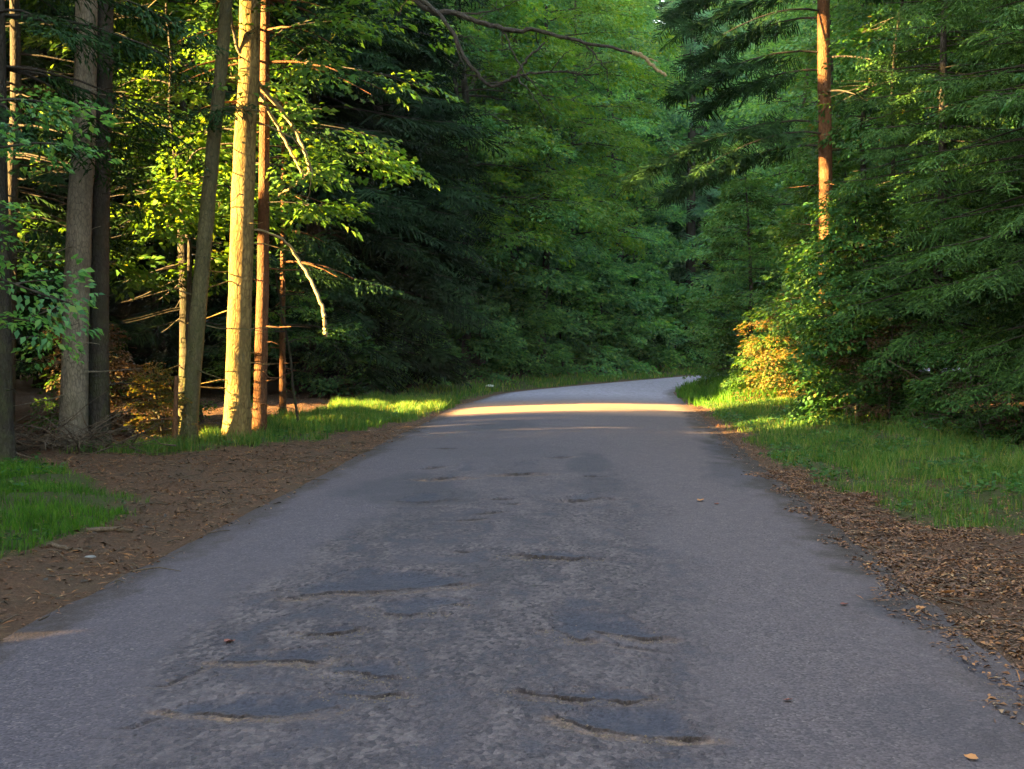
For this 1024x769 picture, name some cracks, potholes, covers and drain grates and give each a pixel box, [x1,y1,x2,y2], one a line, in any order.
pothole [520,486,655,506]
pothole [345,485,507,509]
pothole [112,677,384,731]
pothole [498,598,721,652]
pothole [500,698,764,755]
pothole [320,590,523,624]
pothole [324,676,456,710]
pothole [162,637,395,675]
pothole [473,541,643,566]
pothole [238,557,515,608]
pothole [275,645,462,682]
pothole [484,455,589,479]
